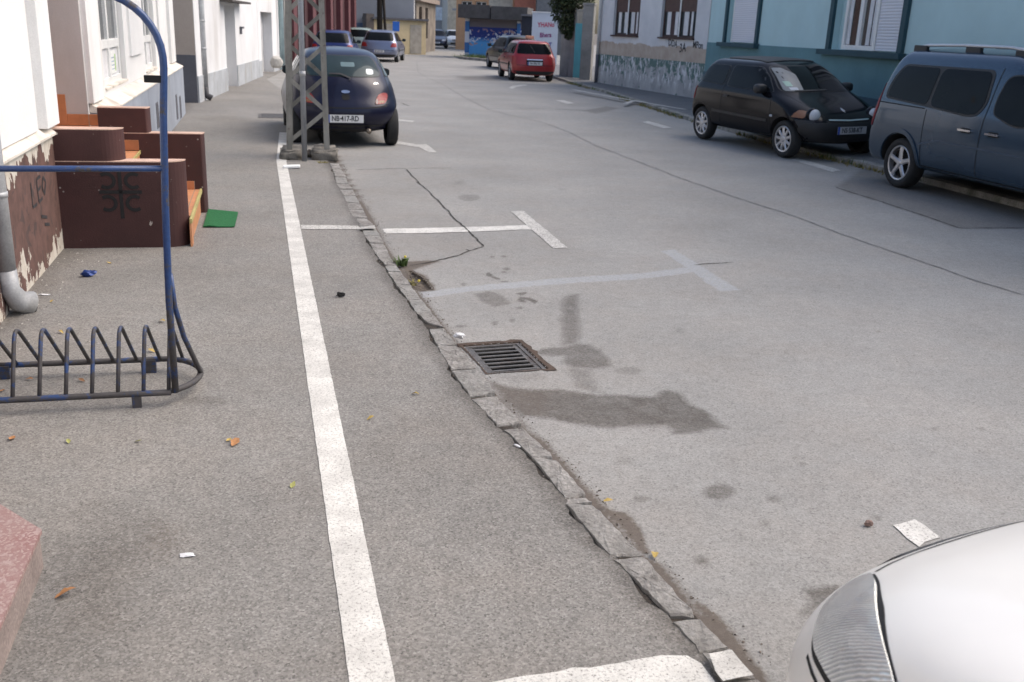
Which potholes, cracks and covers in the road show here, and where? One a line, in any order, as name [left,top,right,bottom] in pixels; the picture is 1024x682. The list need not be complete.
drain grate [457,339,557,374]
pothole [406,270,434,291]
crack [359,168,484,265]
